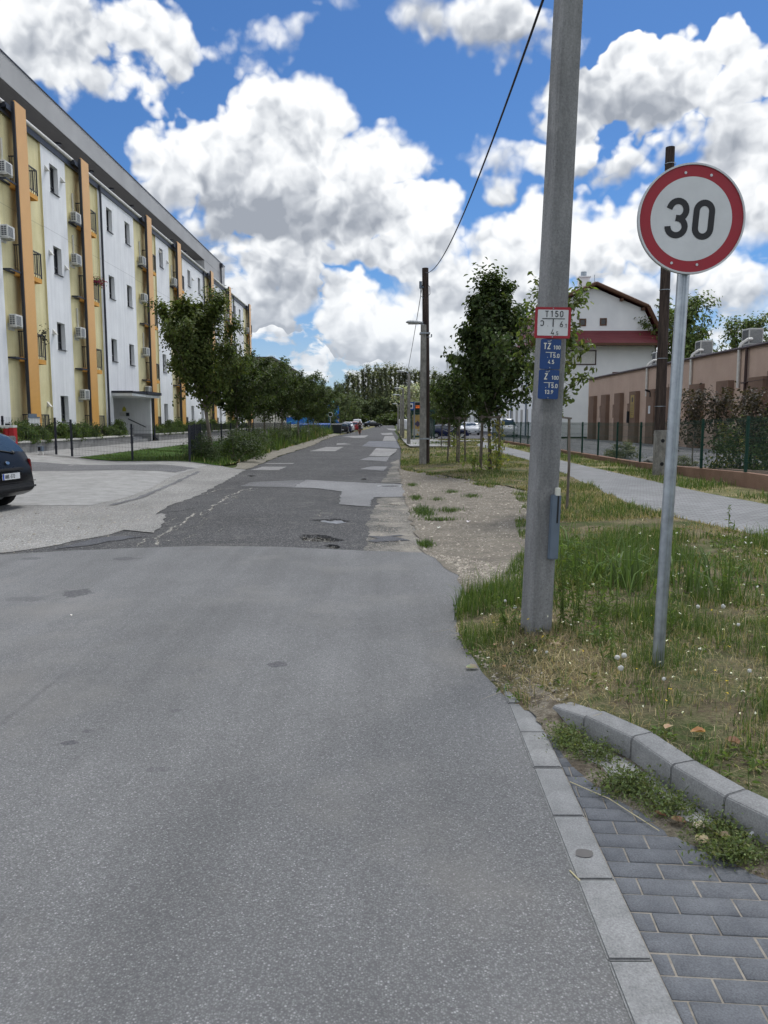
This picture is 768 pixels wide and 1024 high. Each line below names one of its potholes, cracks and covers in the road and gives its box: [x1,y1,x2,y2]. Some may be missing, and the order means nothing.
pothole [299,534,345,542]
crack [135,488,256,546]
